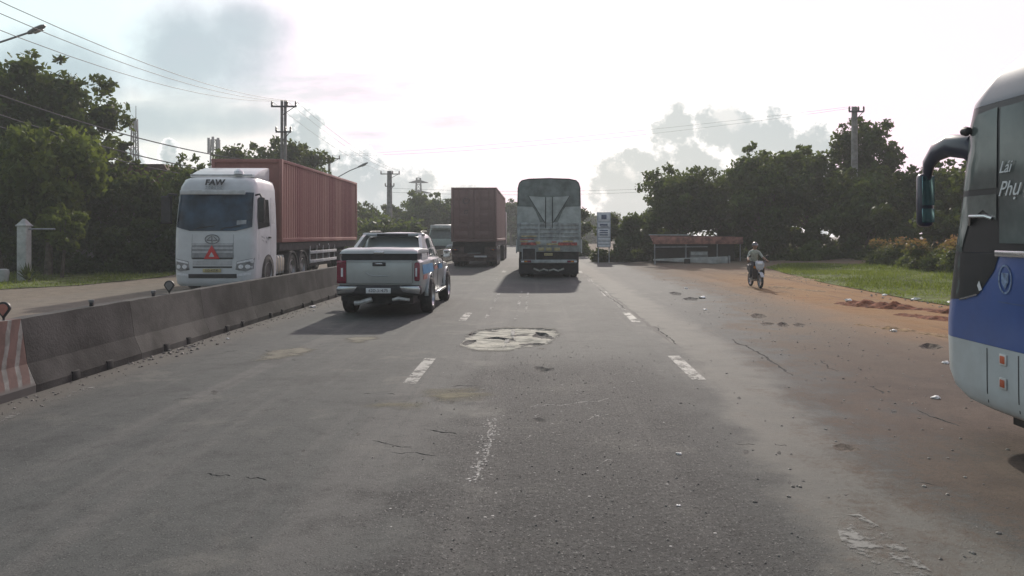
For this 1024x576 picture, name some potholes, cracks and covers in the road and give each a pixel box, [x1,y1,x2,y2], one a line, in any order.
pothole [833,443,860,452]
pothole [460,328,560,350]
crack [732,339,793,376]
